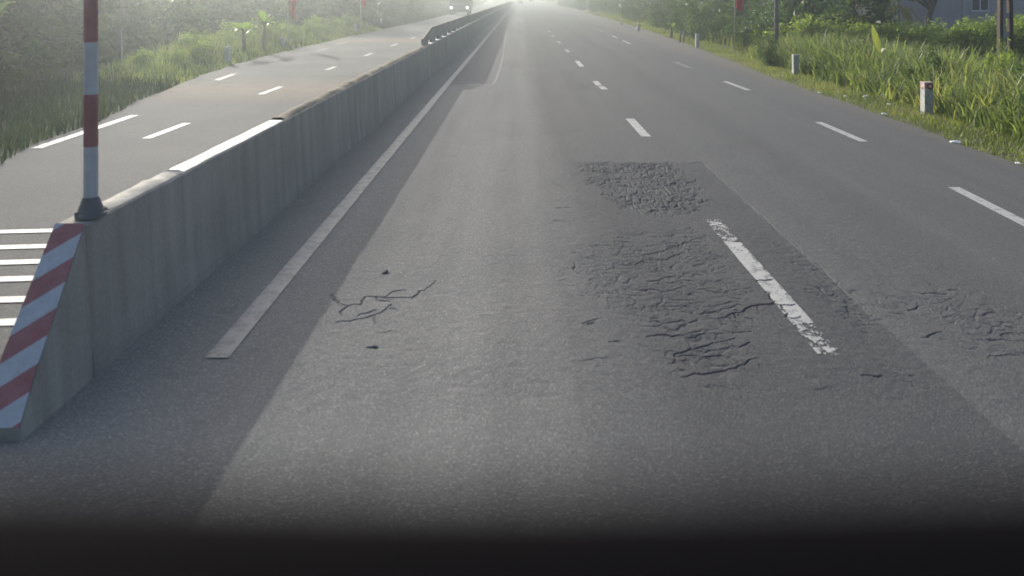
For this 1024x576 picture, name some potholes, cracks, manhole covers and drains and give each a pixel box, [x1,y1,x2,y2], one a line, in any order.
crack [330,280,437,334]
crack [551,159,1024,403]
